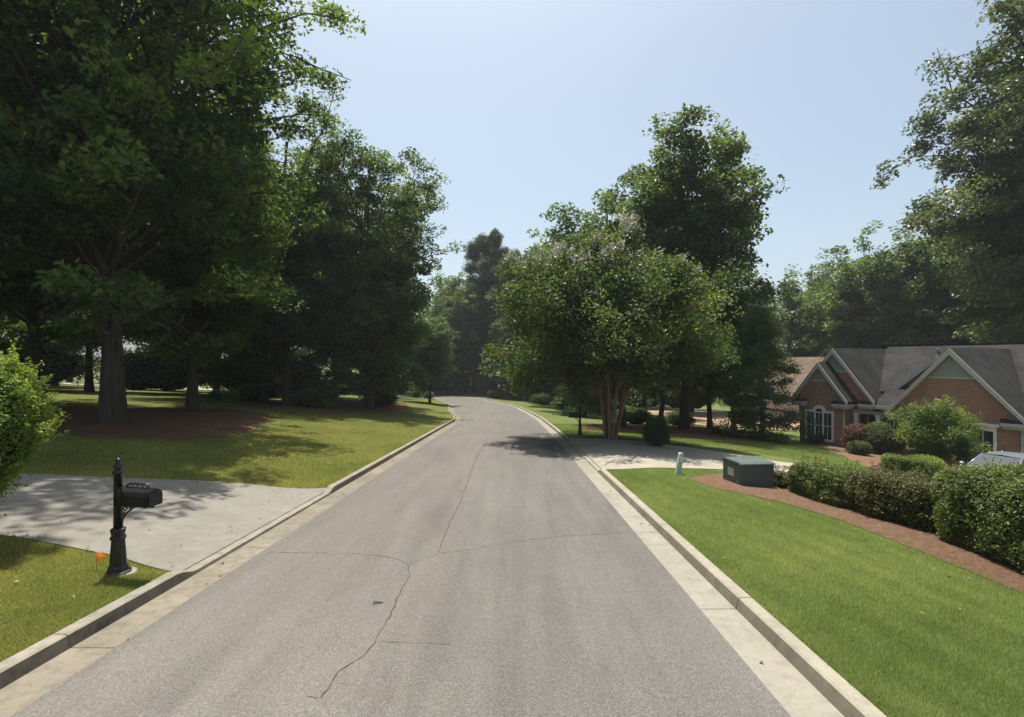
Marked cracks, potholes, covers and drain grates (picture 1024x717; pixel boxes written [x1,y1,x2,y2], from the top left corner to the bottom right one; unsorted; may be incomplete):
crack [301,442,609,698]
